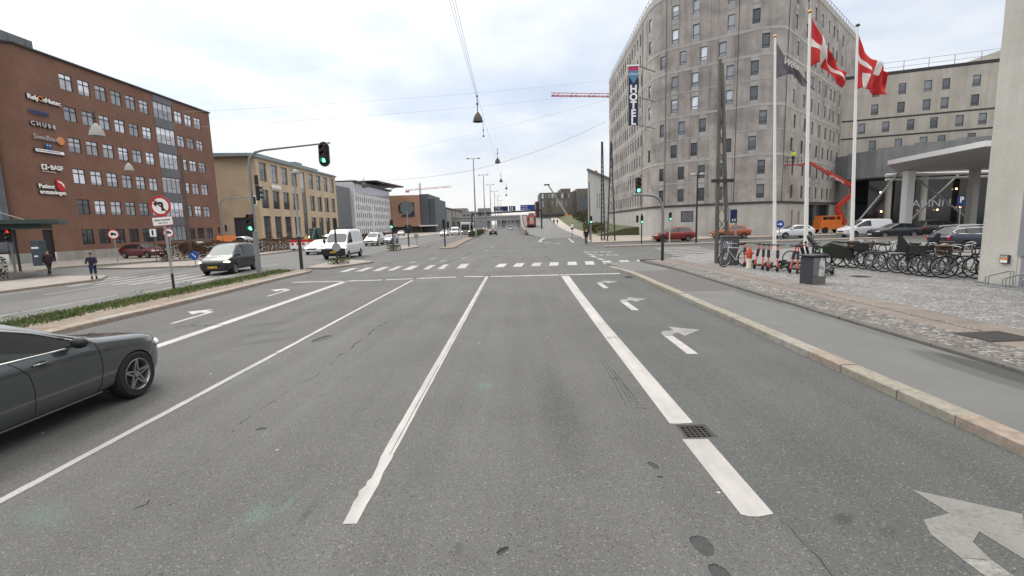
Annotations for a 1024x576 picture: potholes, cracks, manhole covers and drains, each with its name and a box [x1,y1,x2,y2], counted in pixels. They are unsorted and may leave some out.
drain grate [676,425,717,438]
crack [179,322,387,476]
